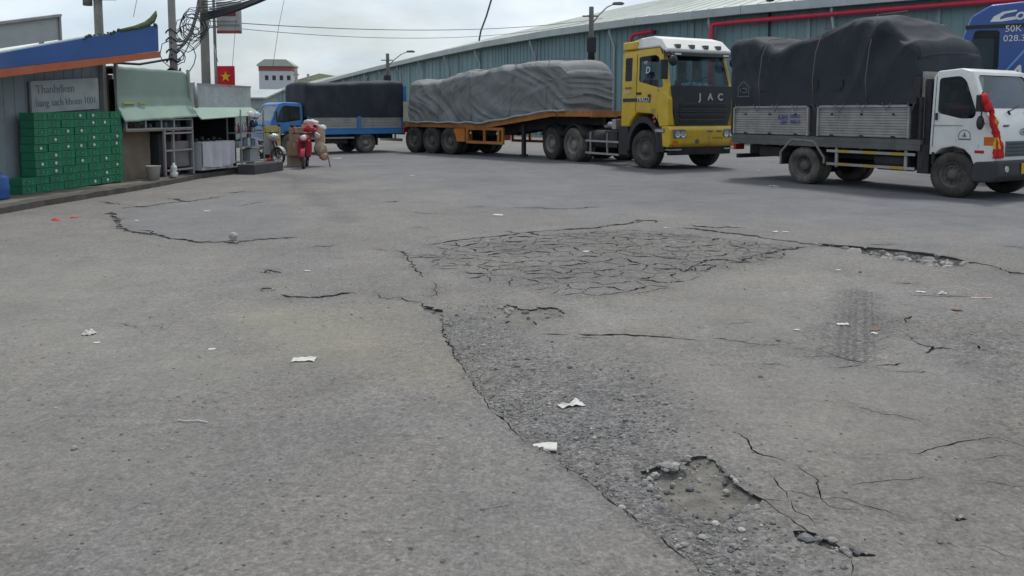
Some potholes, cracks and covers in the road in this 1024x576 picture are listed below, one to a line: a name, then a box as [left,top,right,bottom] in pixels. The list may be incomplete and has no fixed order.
crack [904,316,990,364]
pothole [793,530,876,558]
crack [377,212,825,306]
pothole [817,243,969,267]
pothole [640,455,762,527]
crack [724,433,922,535]
crack [100,191,295,244]
pothole [497,305,565,330]
crack [857,437,1023,459]
